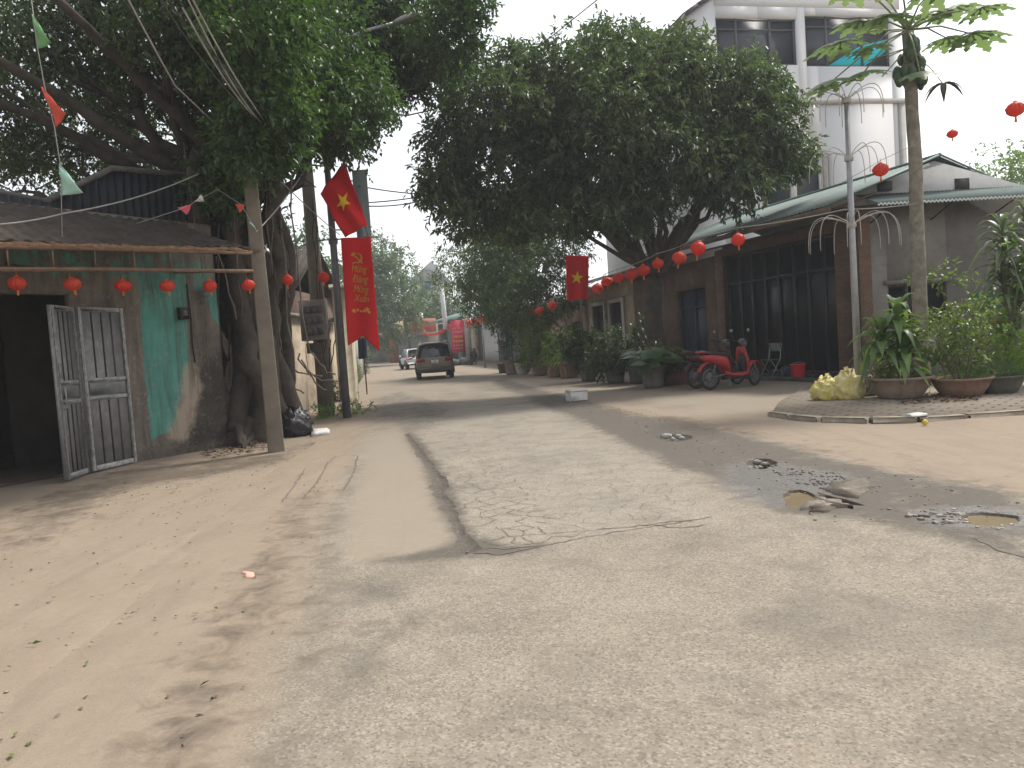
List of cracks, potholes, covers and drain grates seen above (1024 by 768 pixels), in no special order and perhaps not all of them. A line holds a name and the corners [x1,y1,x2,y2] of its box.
pothole [746,458,778,469]
pothole [656,433,693,442]
crack [448,425,711,555]
pothole [783,490,836,513]
crack [282,454,358,502]
pothole [905,508,1022,530]
